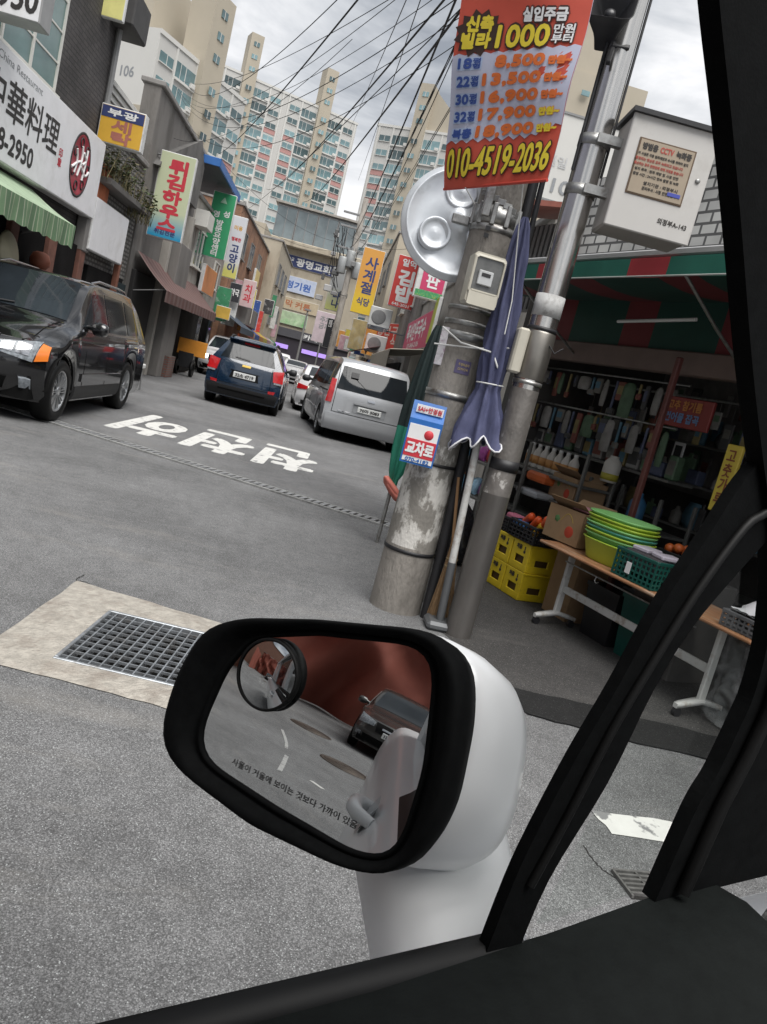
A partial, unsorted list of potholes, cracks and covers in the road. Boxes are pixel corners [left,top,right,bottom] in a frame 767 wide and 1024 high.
drain grate [611,868,651,900]
drain grate [0,581,222,708]
crack [583,845,615,878]
